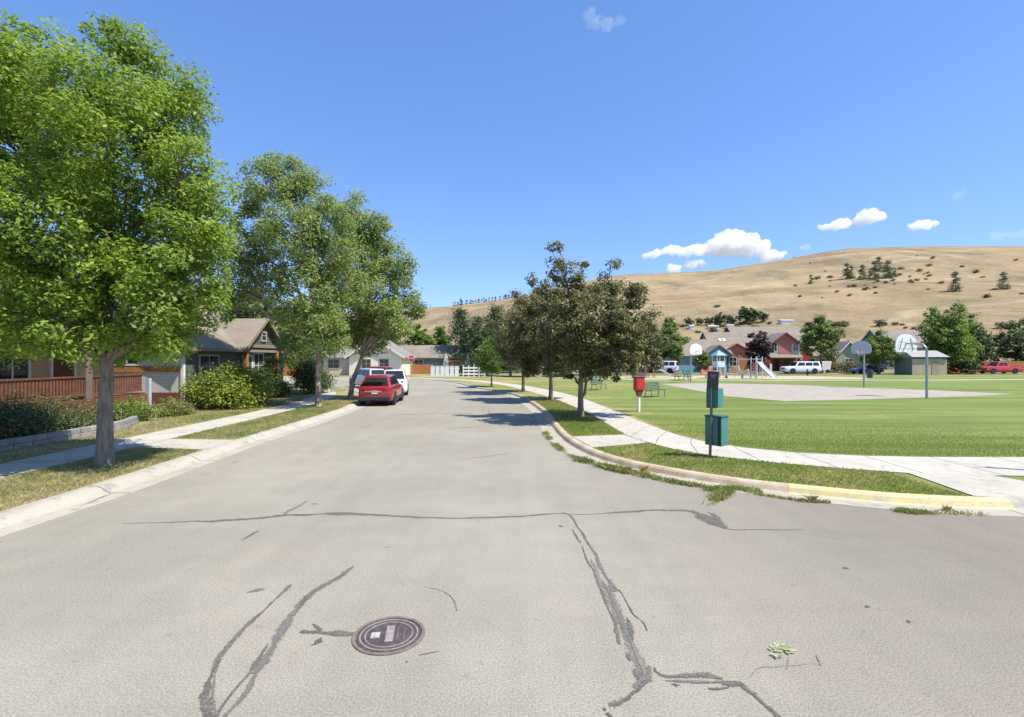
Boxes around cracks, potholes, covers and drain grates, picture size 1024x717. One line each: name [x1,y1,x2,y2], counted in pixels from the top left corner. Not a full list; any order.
crack [559,525,648,680]
crack [752,655,821,674]
manhole cover [352,616,425,656]
